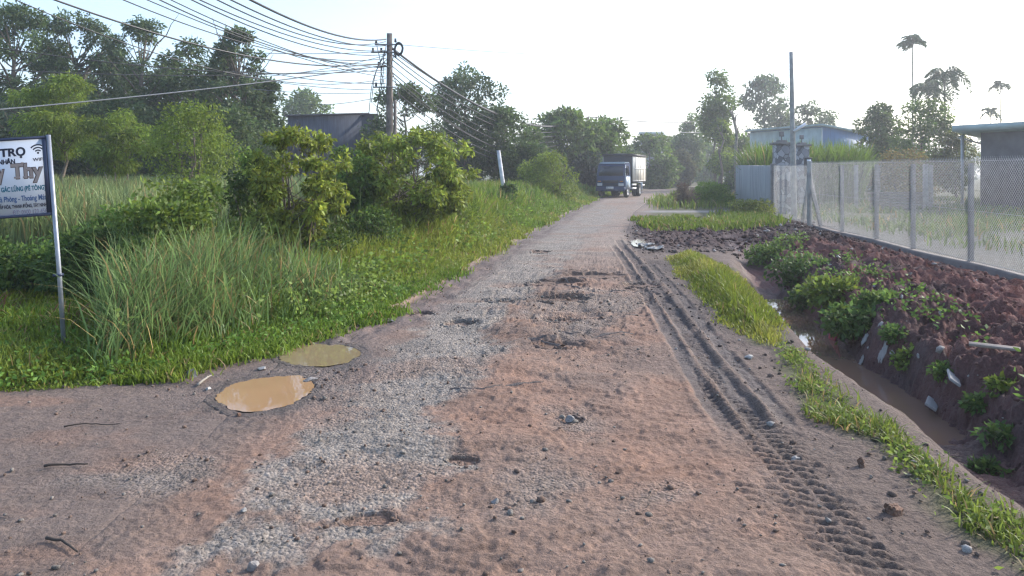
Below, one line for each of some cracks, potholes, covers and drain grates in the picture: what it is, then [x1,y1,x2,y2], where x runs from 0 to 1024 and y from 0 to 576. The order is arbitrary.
pothole [550,269,634,280]
pothole [336,508,400,530]
pothole [443,454,484,467]
pothole [203,372,324,417]
pothole [440,318,478,328]
pothole [518,291,597,304]
pothole [523,277,588,286]
pothole [269,340,369,370]
pothole [532,338,590,350]
